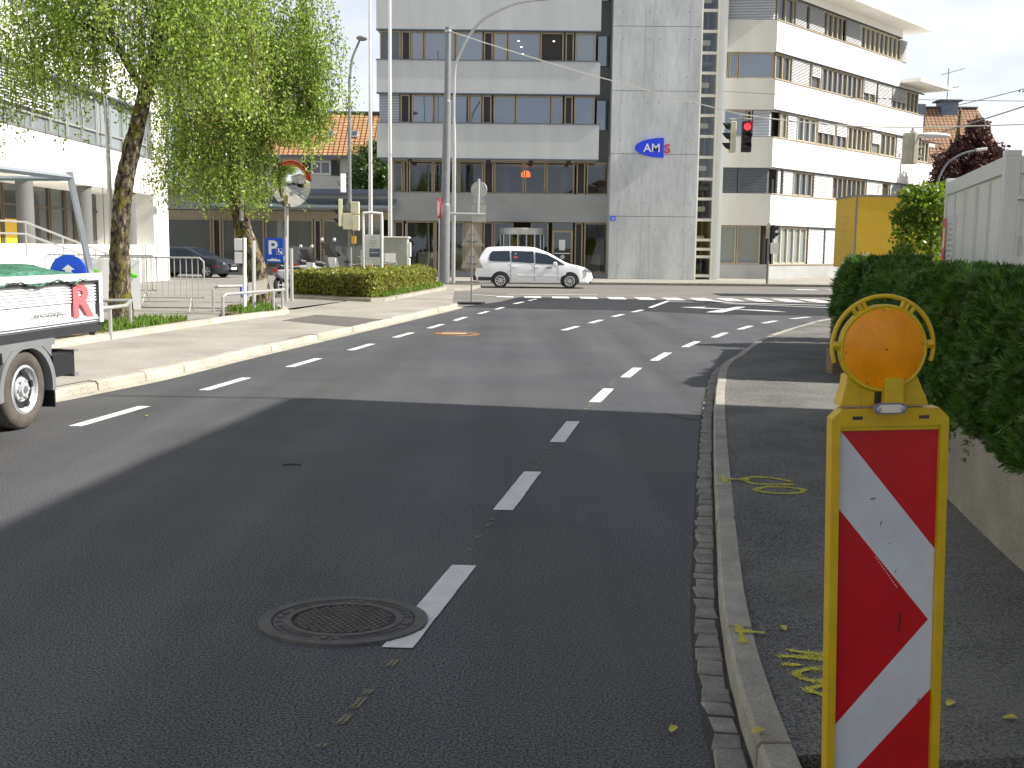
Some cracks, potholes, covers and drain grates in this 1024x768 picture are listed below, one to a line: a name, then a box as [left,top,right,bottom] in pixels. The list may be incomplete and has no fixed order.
manhole cover [258,596,428,647]
